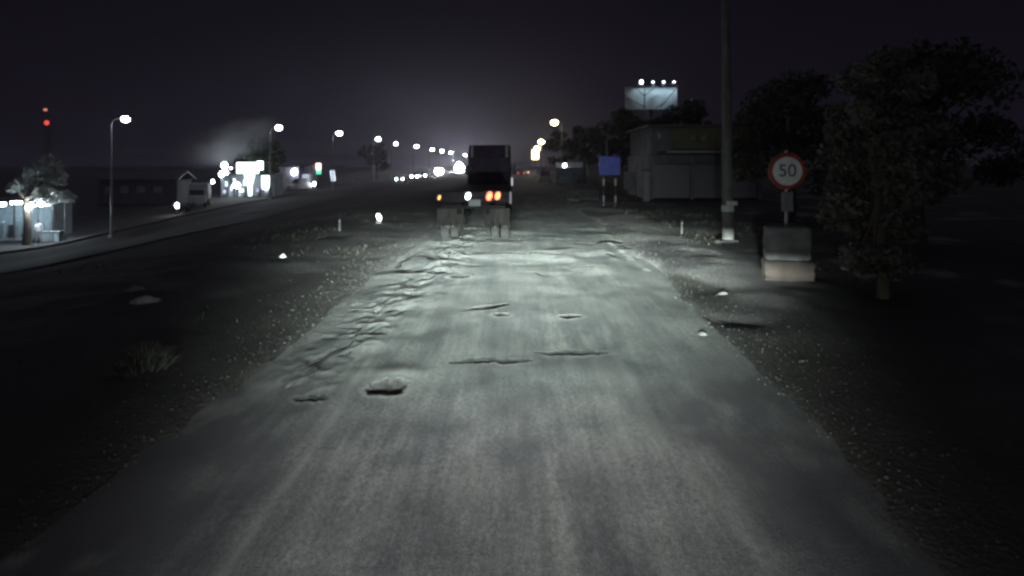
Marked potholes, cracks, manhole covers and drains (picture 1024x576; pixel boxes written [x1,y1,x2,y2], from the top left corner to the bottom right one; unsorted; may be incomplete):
pothole [358,374,417,399]
pothole [285,391,337,405]
pothole [524,348,618,358]
pothole [439,355,541,366]
pothole [456,302,514,312]
crack [285,234,642,388]
